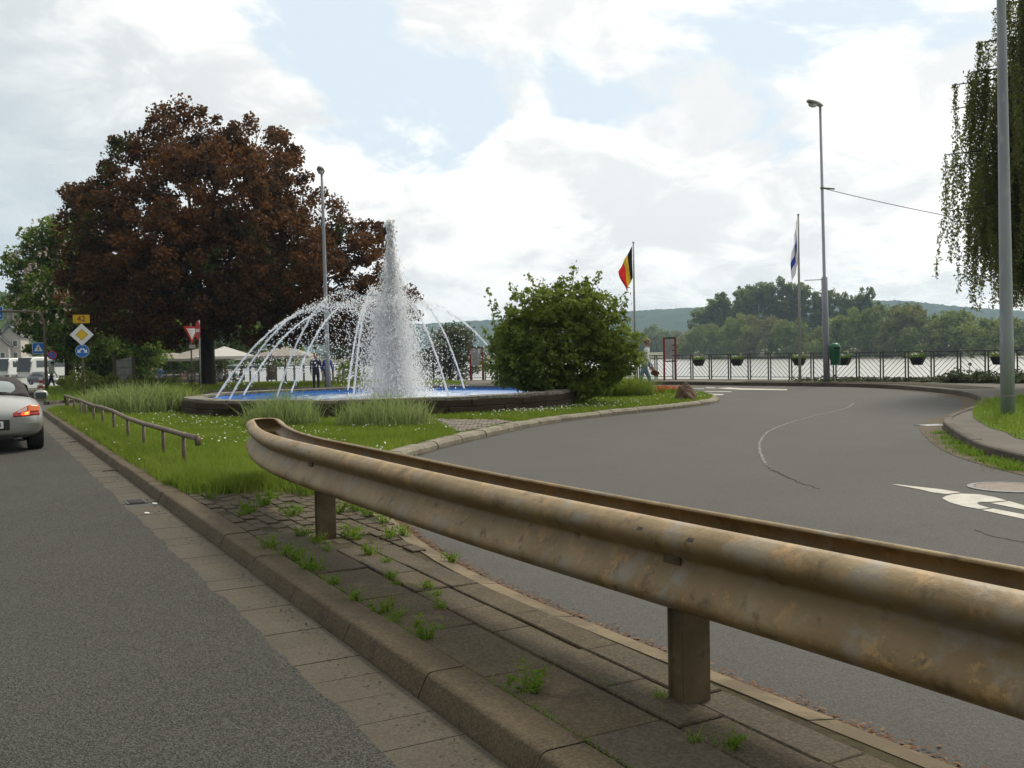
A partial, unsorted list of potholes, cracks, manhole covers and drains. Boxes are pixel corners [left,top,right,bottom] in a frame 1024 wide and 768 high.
manhole cover [967,482,1024,493]
